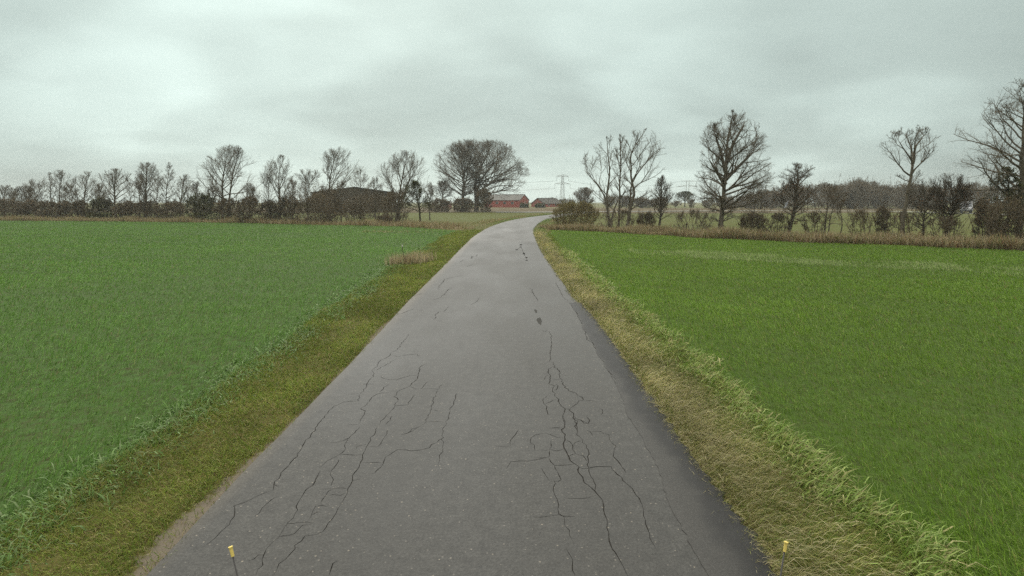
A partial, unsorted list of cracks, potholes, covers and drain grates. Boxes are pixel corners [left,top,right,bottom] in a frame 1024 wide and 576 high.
crack [205,341,456,572]
crack [506,330,655,576]
